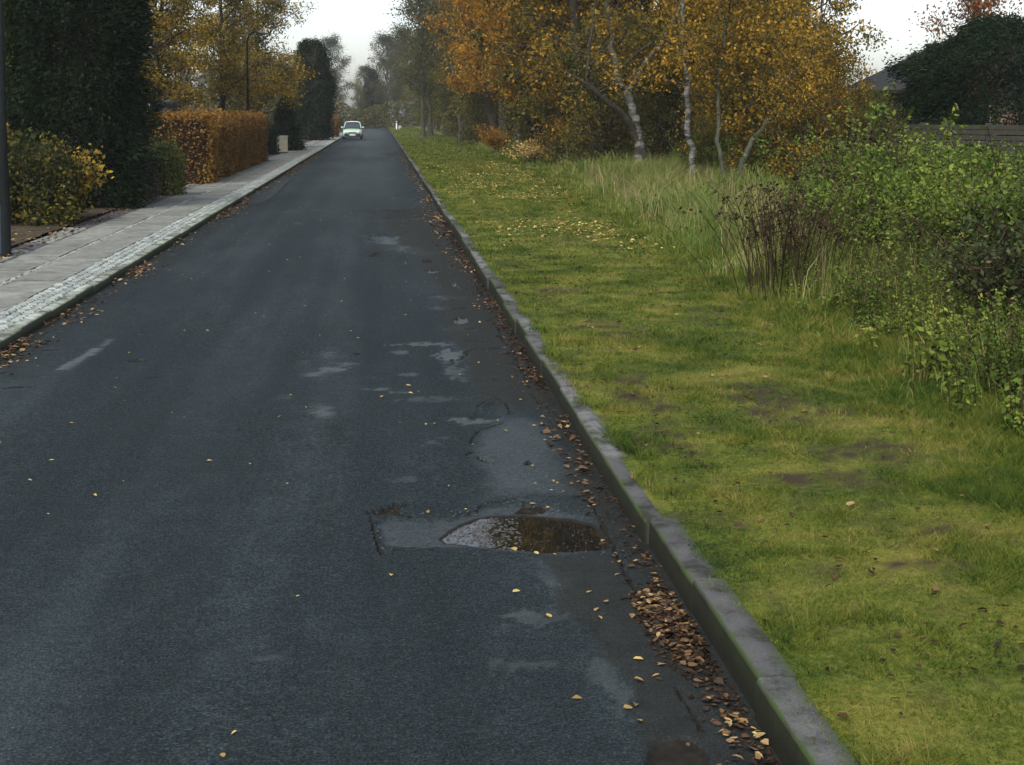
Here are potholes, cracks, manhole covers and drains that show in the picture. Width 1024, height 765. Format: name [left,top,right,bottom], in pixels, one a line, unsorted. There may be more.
crack [466,397,511,456]
pothole [642,734,718,765]
pothole [371,496,617,559]
